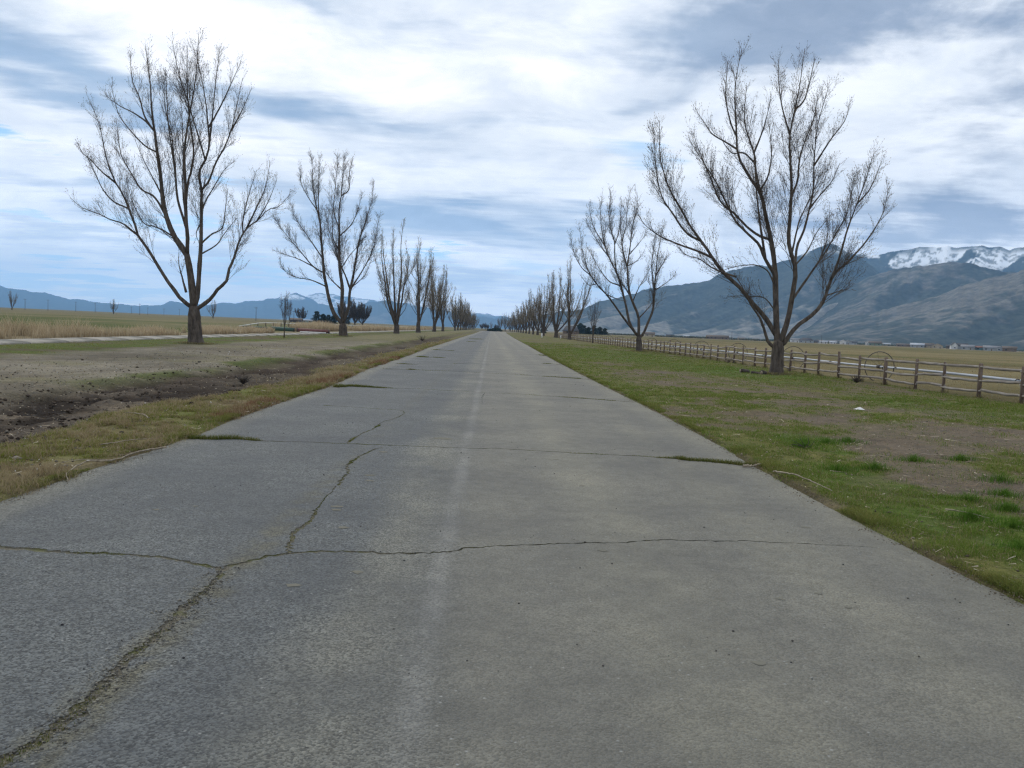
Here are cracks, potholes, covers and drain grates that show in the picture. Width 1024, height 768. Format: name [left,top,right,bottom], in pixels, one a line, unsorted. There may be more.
crack [0,405,865,768]
